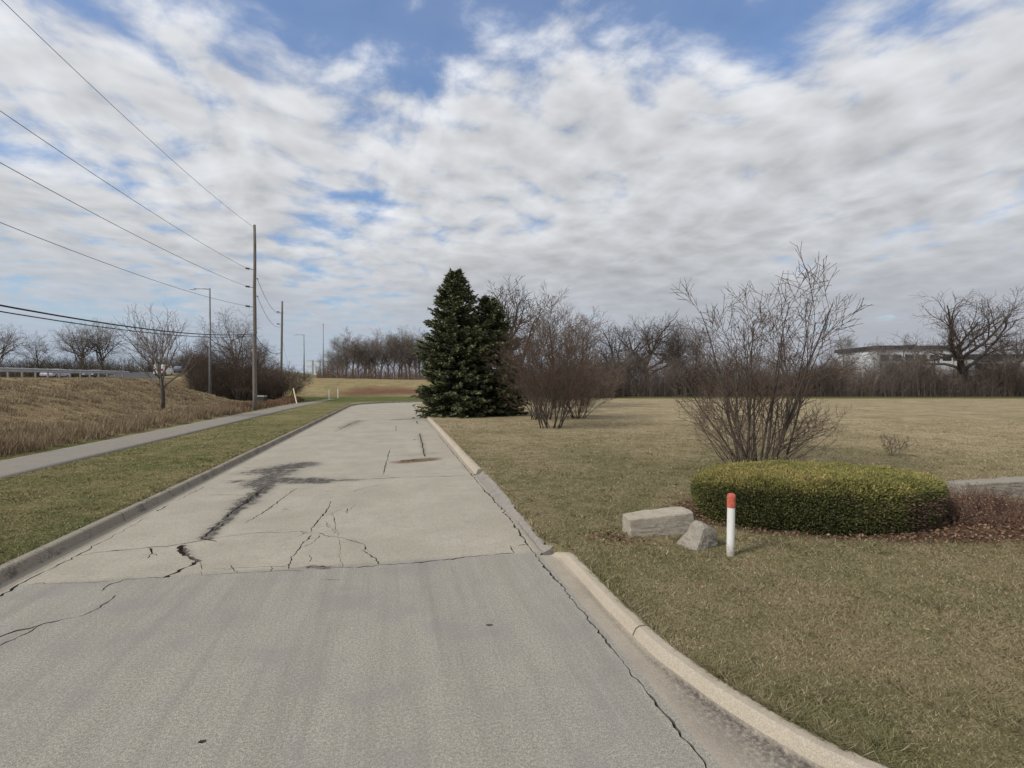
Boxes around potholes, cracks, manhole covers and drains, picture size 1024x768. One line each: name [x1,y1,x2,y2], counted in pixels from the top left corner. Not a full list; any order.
crack [0,442,434,646]
